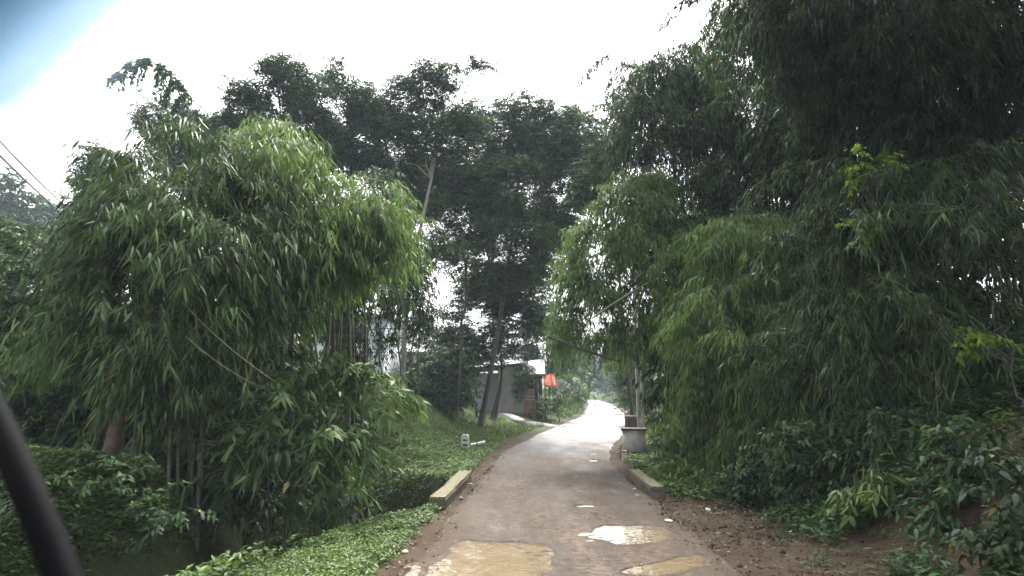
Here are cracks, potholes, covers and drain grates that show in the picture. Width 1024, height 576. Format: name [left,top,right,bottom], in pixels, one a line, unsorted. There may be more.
pothole [417,539,560,576]
pothole [578,524,678,546]
pothole [616,554,714,576]
